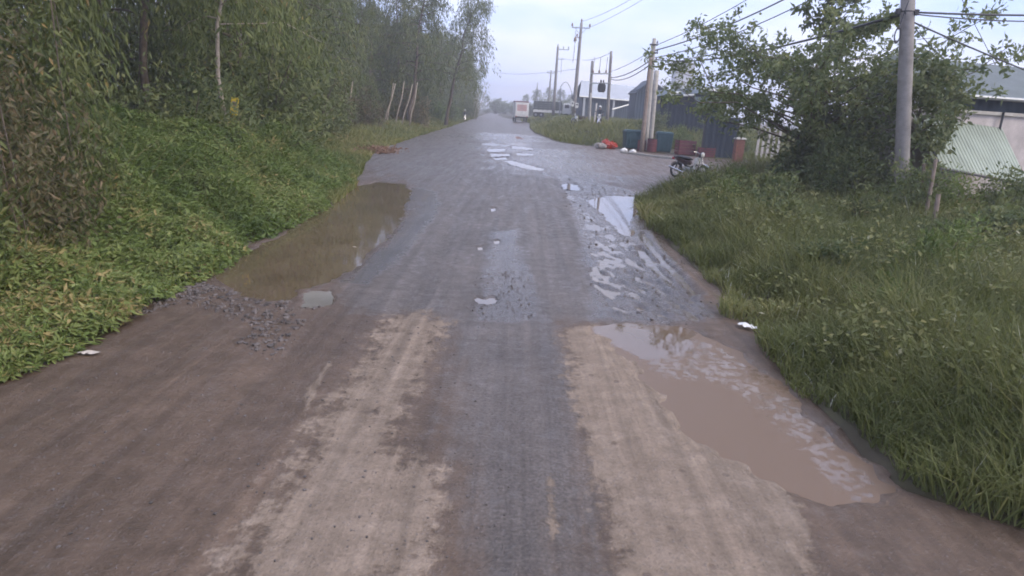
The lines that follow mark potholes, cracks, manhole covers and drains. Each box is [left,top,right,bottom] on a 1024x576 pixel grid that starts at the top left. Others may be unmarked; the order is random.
pothole [585,195,638,237]
pothole [504,160,546,171]
pothole [299,288,336,308]
pothole [212,181,414,302]
pothole [560,182,580,191]
pothole [472,295,500,305]
pothole [587,322,907,509]
